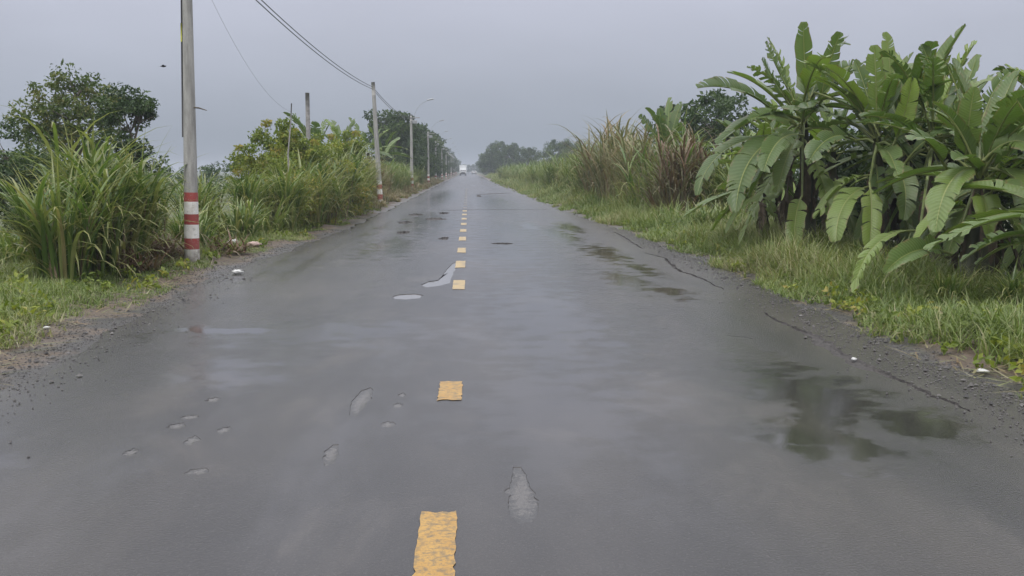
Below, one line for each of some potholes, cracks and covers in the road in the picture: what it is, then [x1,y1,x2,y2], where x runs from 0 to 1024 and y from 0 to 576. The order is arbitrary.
pothole [184,468,209,476]
crack [729,312,971,412]
crack [614,232,723,289]
pothole [349,388,373,416]
pothole [323,444,339,466]
pothole [504,467,539,524]
